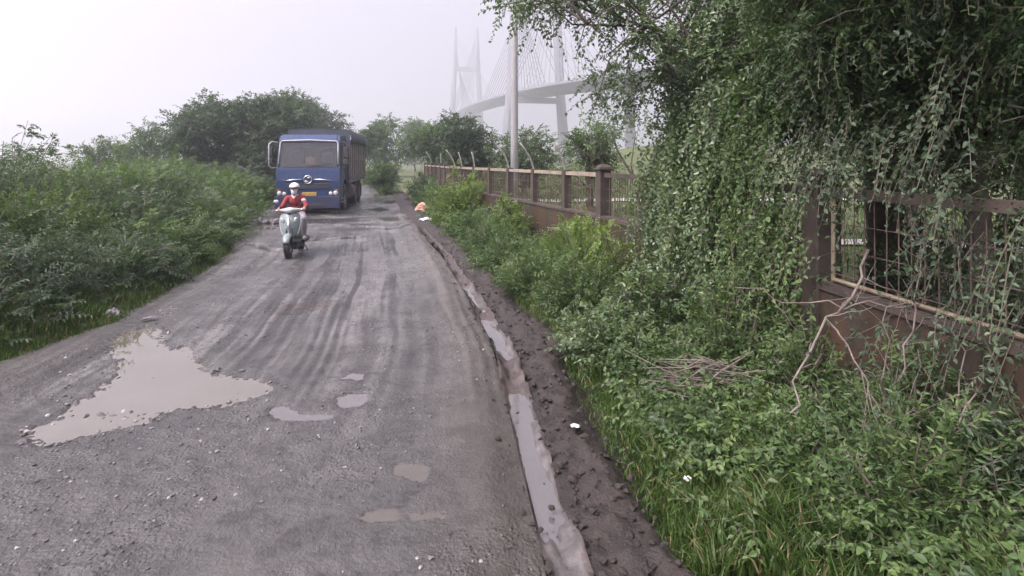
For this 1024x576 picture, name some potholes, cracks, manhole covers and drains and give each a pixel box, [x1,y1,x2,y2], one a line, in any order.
pothole [347,505,404,525]
pothole [396,507,451,525]
pothole [263,403,338,423]
pothole [387,461,436,484]
pothole [331,391,373,408]
pothole [0,323,288,450]
pothole [338,371,369,381]
